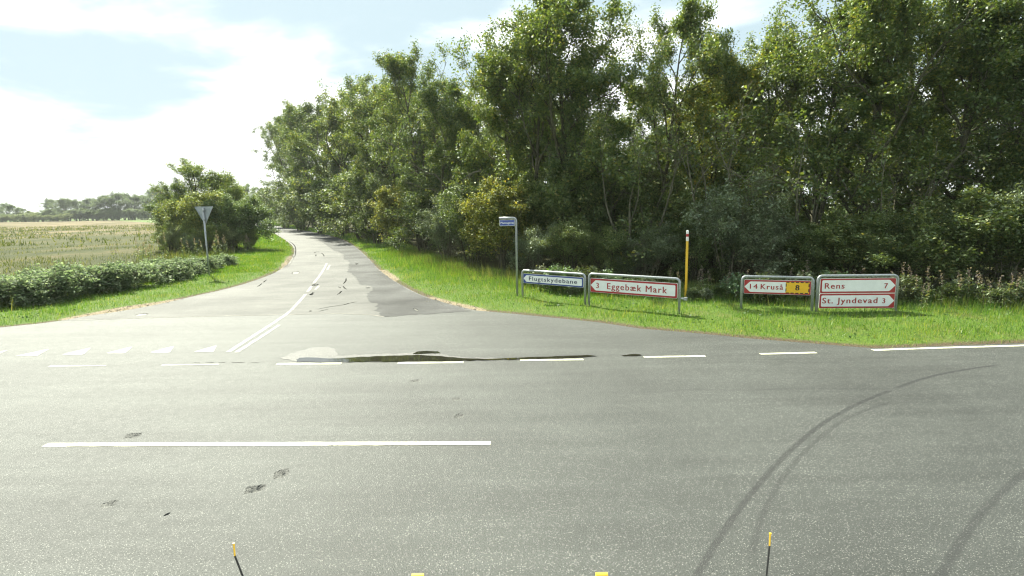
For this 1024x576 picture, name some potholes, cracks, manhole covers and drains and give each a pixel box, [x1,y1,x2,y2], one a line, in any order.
pothole [273,468,290,479]
pothole [244,484,267,494]
